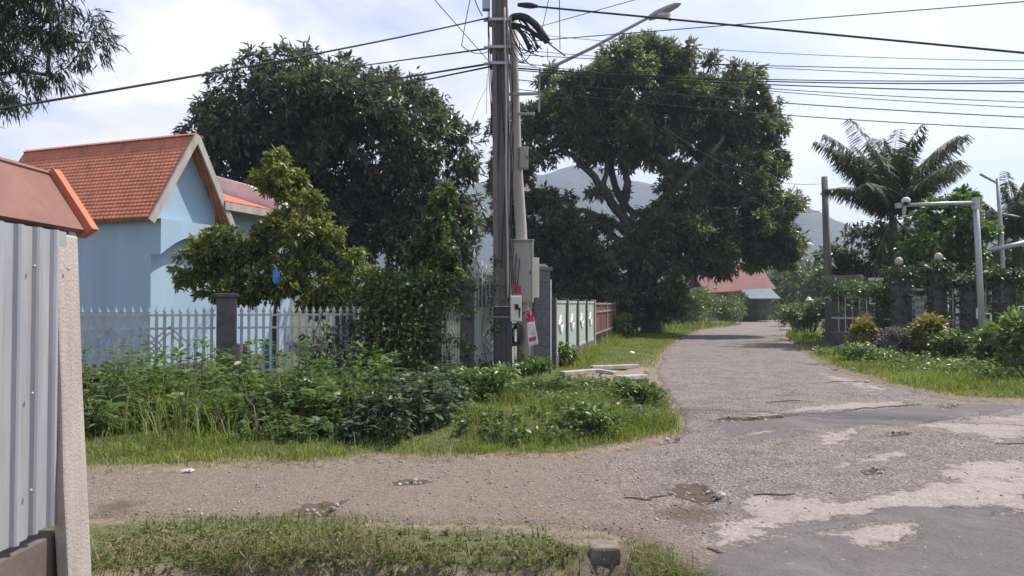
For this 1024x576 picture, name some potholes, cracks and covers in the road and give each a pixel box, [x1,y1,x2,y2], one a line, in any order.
pothole [861,466,886,475]
pothole [665,483,721,506]
pothole [290,499,350,518]
pothole [392,478,434,486]
